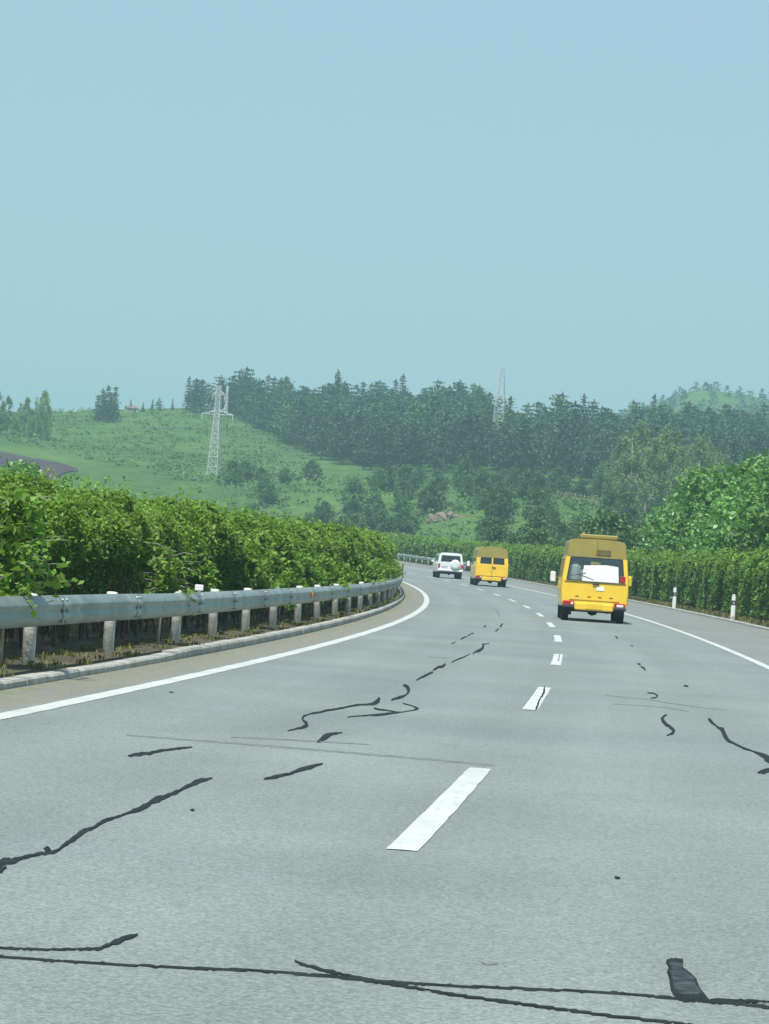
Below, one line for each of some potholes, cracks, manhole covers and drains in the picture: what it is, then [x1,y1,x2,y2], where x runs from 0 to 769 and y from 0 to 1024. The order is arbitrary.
crack [0,933,769,1024]
crack [126,607,503,766]
crack [606,695,769,763]
